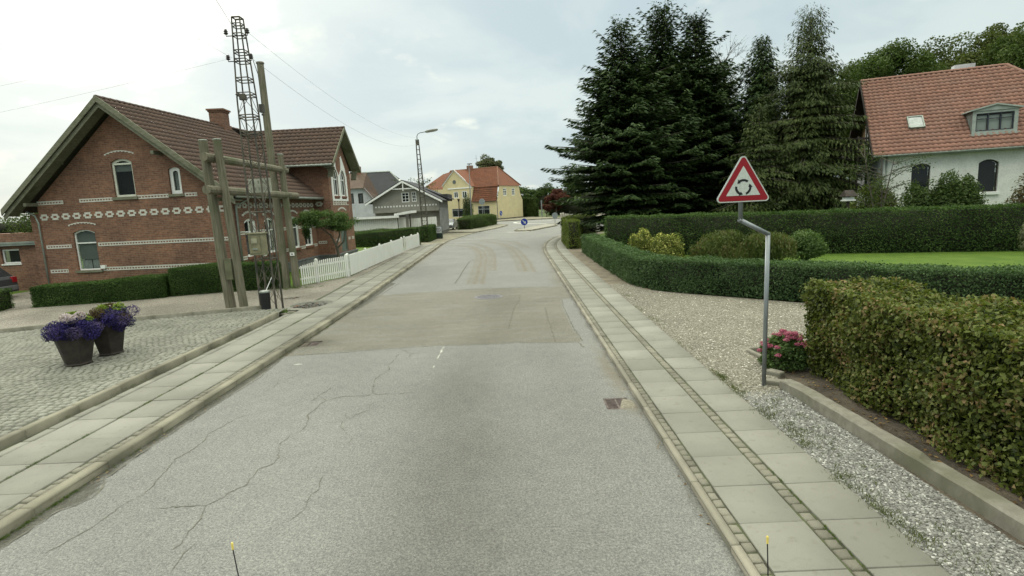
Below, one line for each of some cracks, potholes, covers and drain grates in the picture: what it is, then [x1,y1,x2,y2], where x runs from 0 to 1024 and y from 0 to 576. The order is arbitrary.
drain grate [603,398,635,410]
crack [168,260,585,573]
crack [0,359,297,553]
